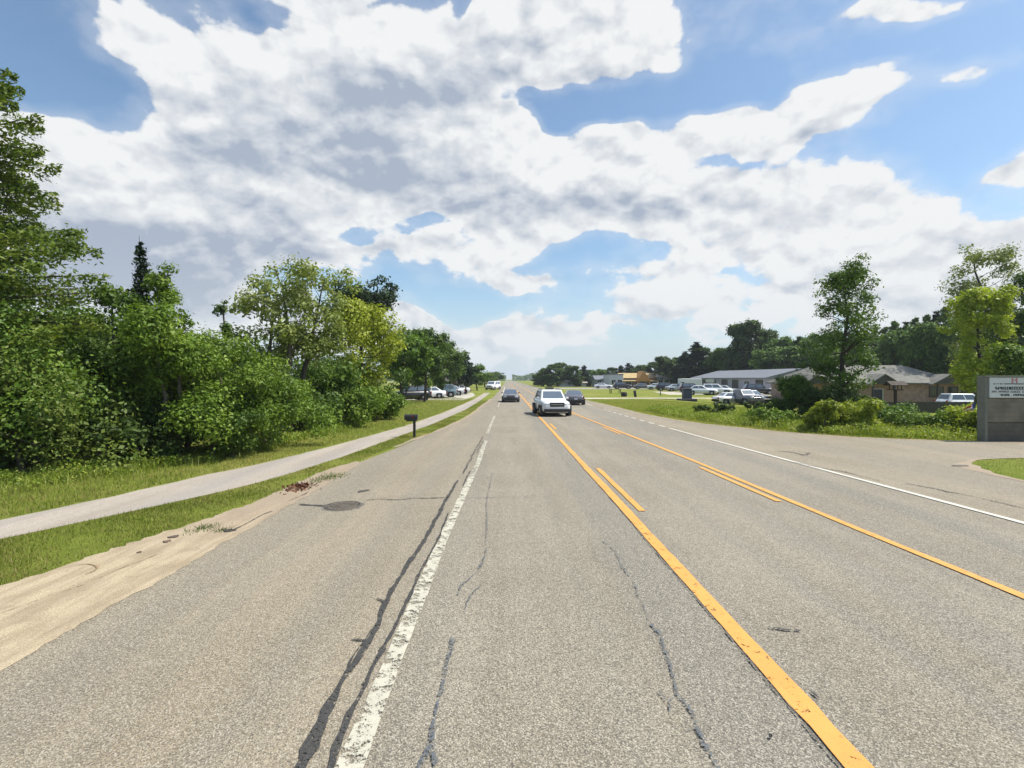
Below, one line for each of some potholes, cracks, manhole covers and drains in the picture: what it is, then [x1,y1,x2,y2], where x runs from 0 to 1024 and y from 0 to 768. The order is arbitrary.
manhole cover [320,501,365,511]
crack [417,638,456,768]
crack [604,541,721,768]
crack [457,473,493,610]
